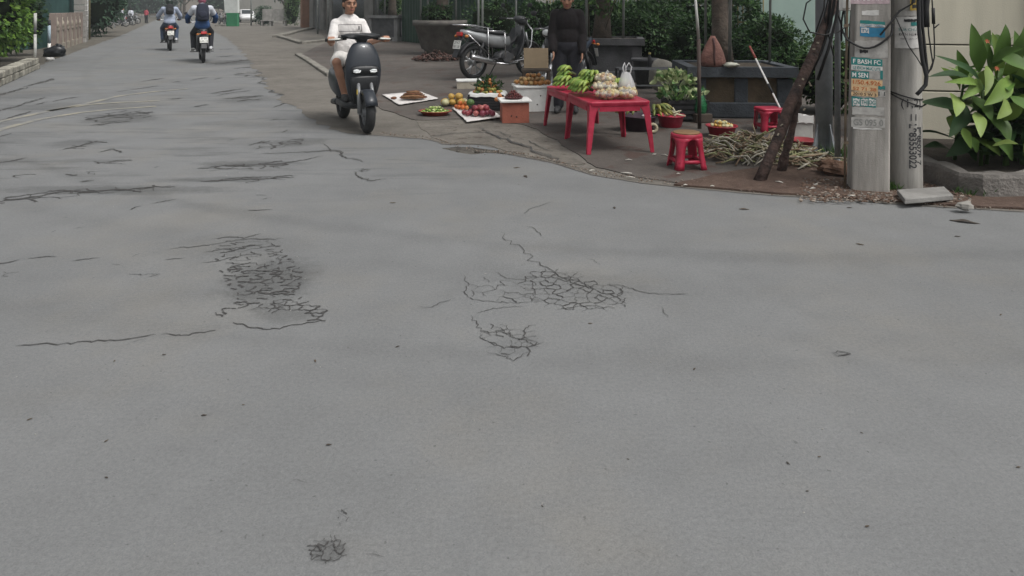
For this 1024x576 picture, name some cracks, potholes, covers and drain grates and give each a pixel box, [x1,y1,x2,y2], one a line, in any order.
crack [172,234,328,329]
crack [0,110,175,228]
crack [17,330,214,346]
crack [472,318,540,361]
crack [420,232,686,313]
crack [117,56,380,211]
crack [295,479,384,571]
